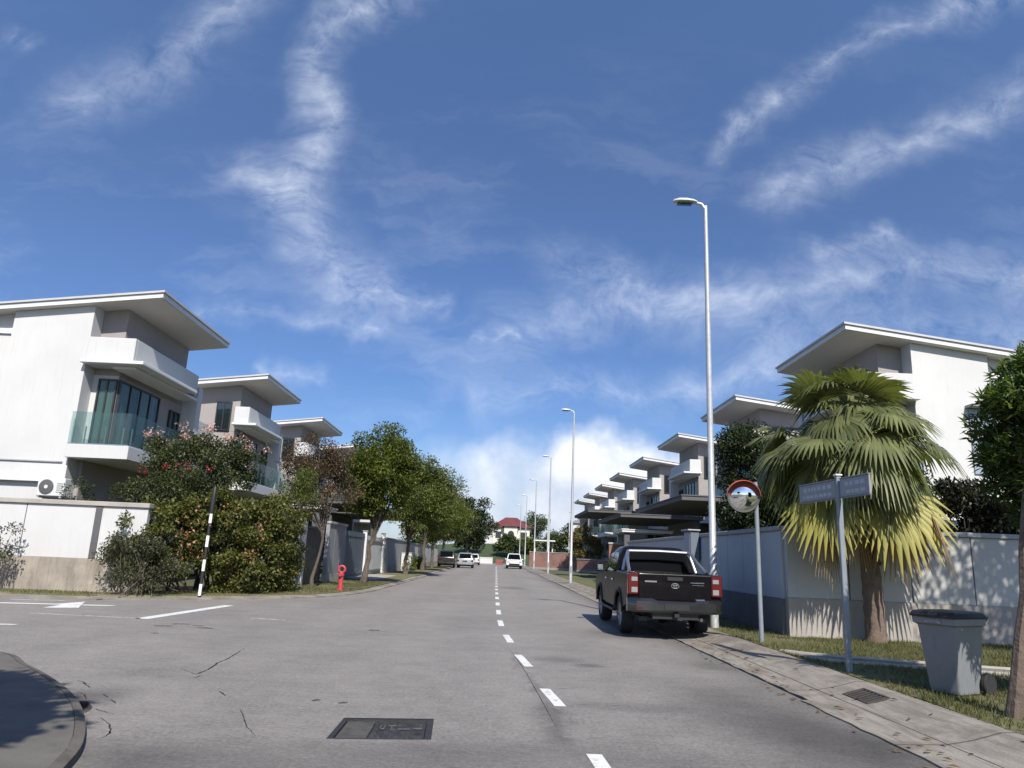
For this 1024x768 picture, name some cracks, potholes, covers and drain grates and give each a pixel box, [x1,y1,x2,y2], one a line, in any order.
crack [77,680,116,738]
drain grate [842,688,890,704]
crack [181,649,244,678]
manhole cover [327,718,434,740]
